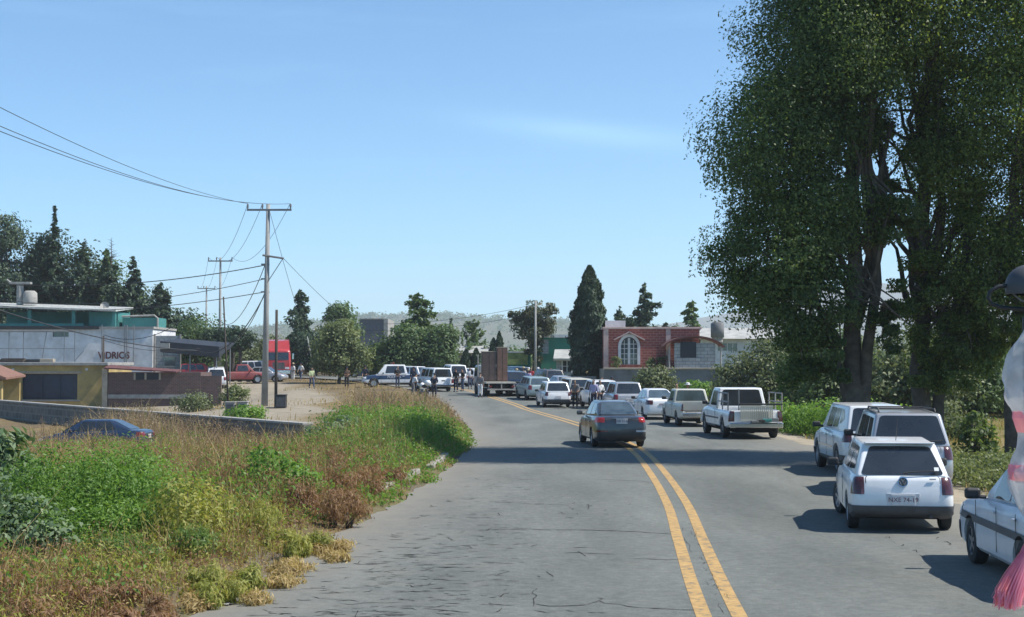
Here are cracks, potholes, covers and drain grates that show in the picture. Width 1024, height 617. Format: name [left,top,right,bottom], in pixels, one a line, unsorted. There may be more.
crack [266,478,724,617]
